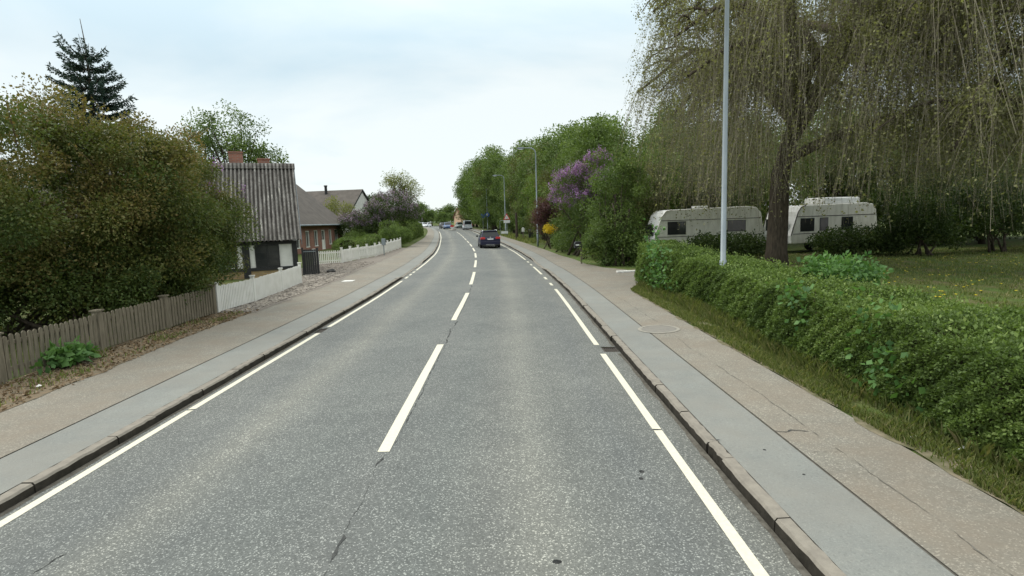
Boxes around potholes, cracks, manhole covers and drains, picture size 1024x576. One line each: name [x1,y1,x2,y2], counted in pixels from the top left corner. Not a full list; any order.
manhole cover [638,325,680,333]
